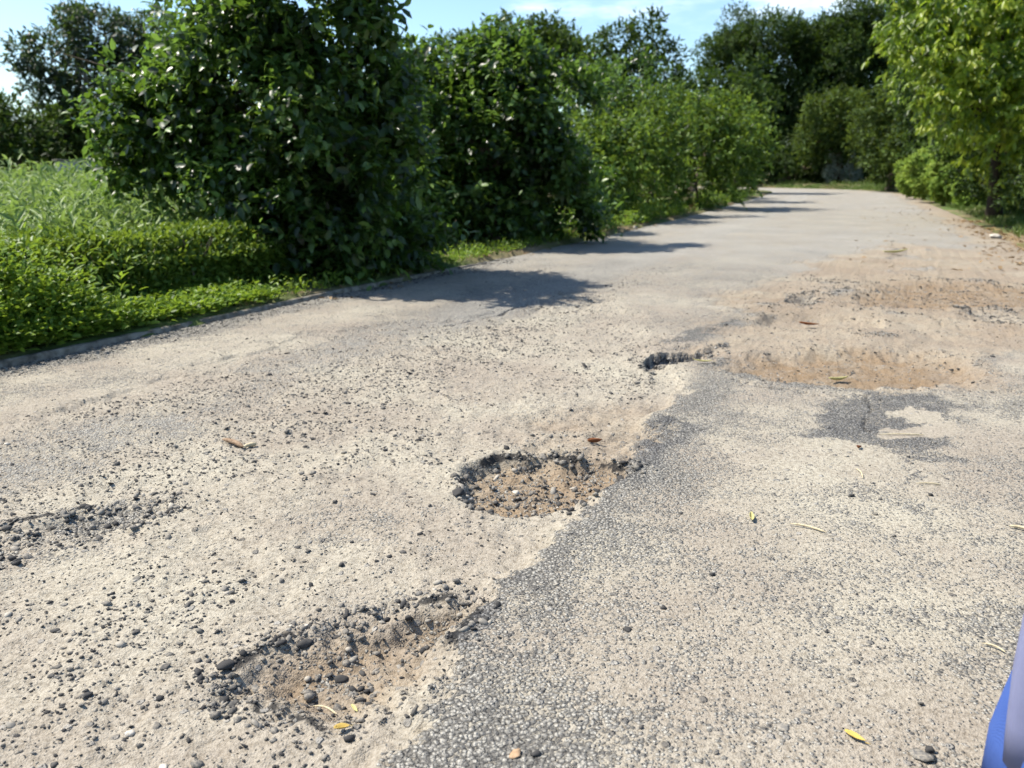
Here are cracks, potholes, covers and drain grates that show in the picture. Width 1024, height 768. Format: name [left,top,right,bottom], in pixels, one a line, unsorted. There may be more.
pothole [459,451,642,518]
pothole [703,342,999,395]
pothole [207,590,499,736]
pothole [0,496,182,570]
